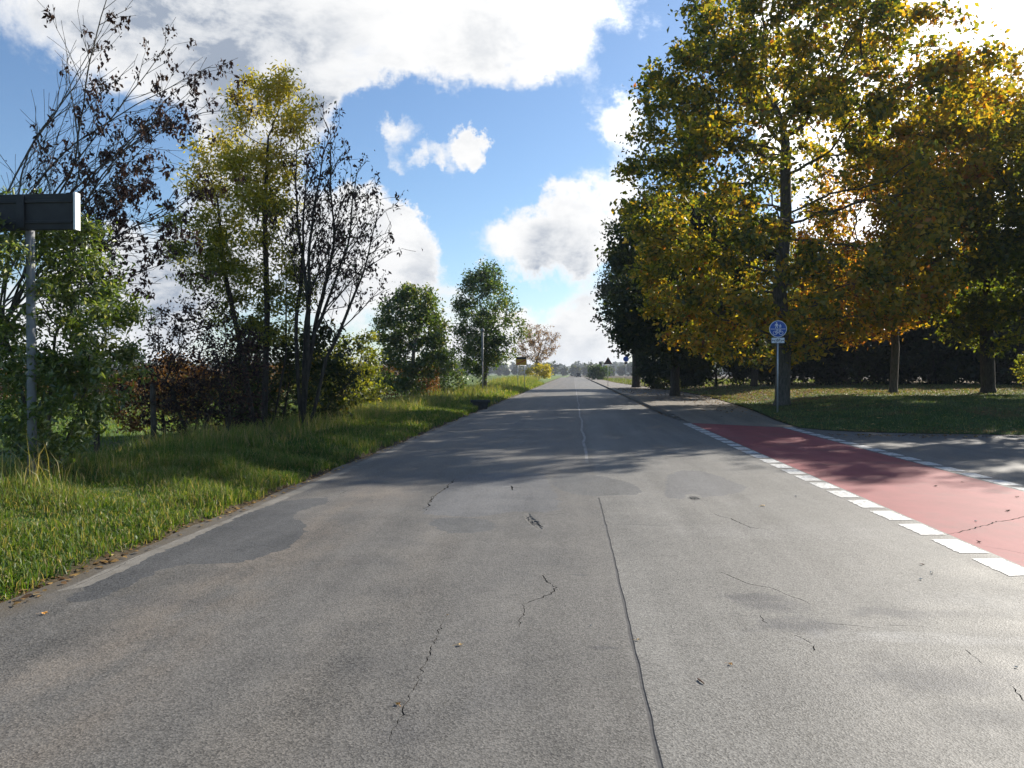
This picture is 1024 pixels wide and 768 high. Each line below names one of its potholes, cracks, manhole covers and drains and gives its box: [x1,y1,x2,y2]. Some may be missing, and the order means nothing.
crack [388,622,443,743]
crack [519,575,557,625]
